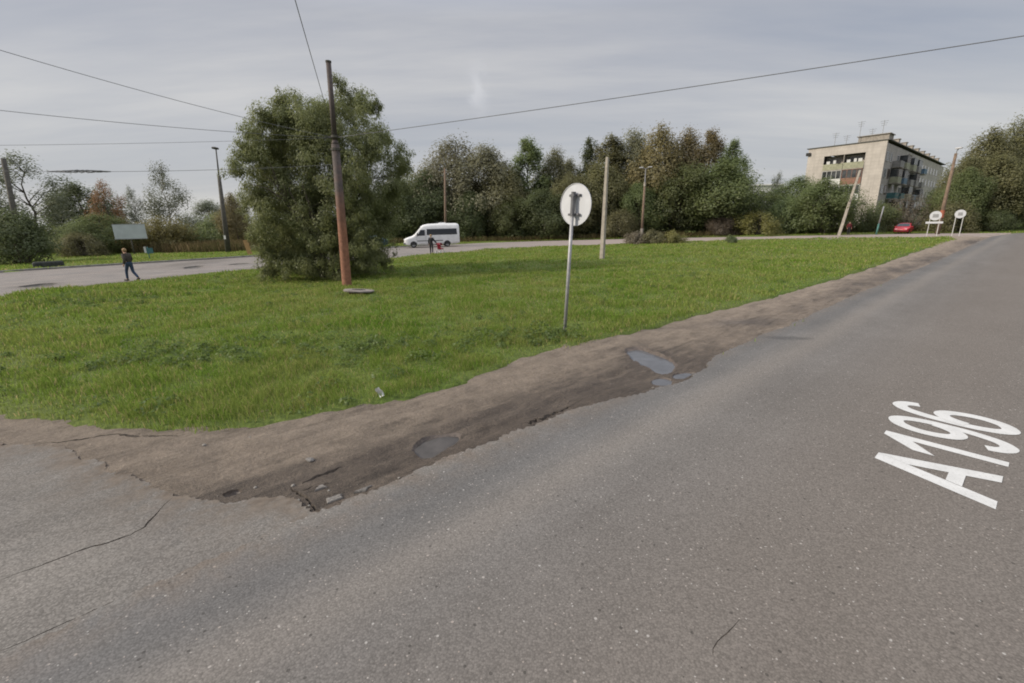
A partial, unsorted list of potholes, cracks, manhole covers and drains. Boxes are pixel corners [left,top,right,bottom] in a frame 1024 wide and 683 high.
pothole [625,346,677,374]
pothole [412,433,462,459]
pothole [651,377,674,386]
crack [1,498,172,580]
crack [52,433,177,443]
crack [291,467,341,511]
